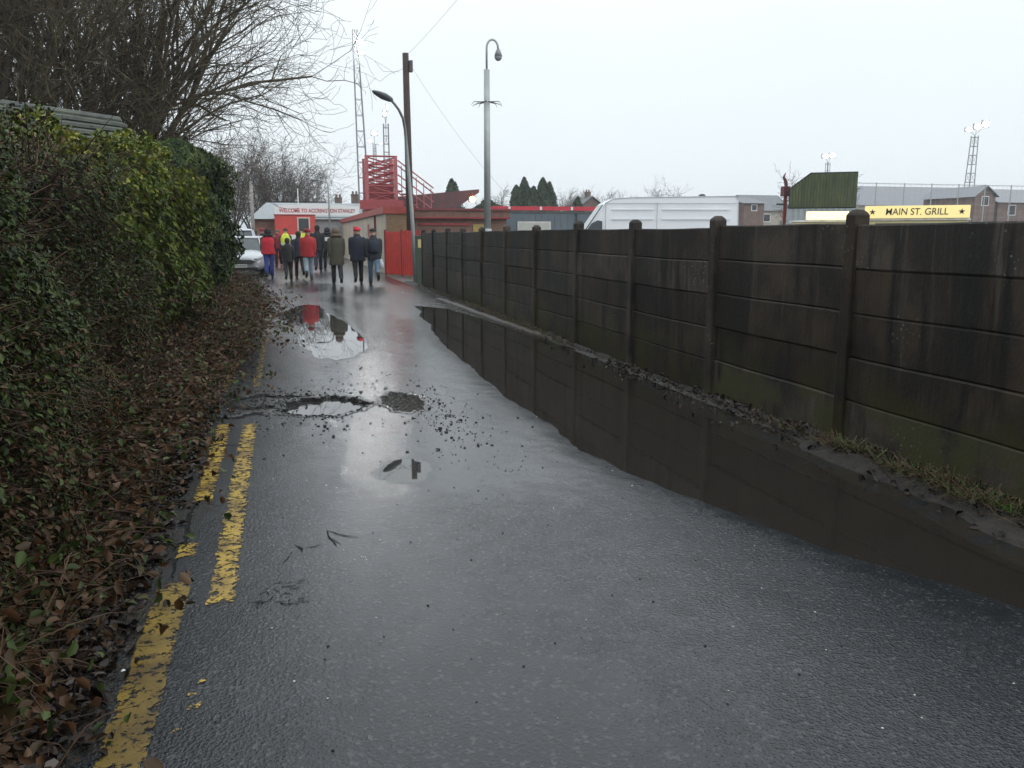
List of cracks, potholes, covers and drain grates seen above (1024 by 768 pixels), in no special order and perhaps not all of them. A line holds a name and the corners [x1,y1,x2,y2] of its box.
pothole [273,394,378,418]
pothole [377,390,428,414]
crack [212,394,315,419]
